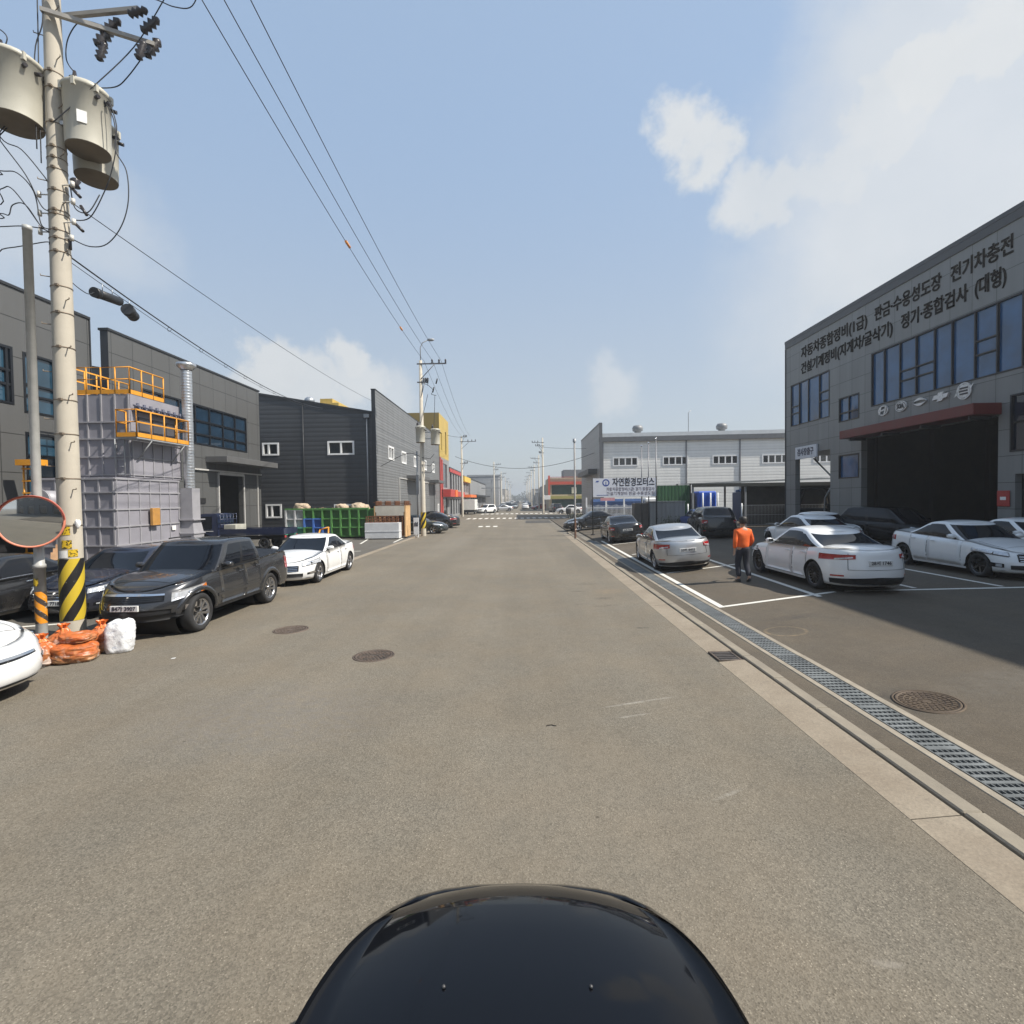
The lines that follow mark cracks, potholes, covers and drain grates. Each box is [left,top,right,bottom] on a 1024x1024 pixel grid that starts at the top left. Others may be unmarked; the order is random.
manhole cover [272,625,309,634]
manhole cover [353,649,395,662]
manhole cover [891,689,967,714]
drain grate [708,651,742,662]
